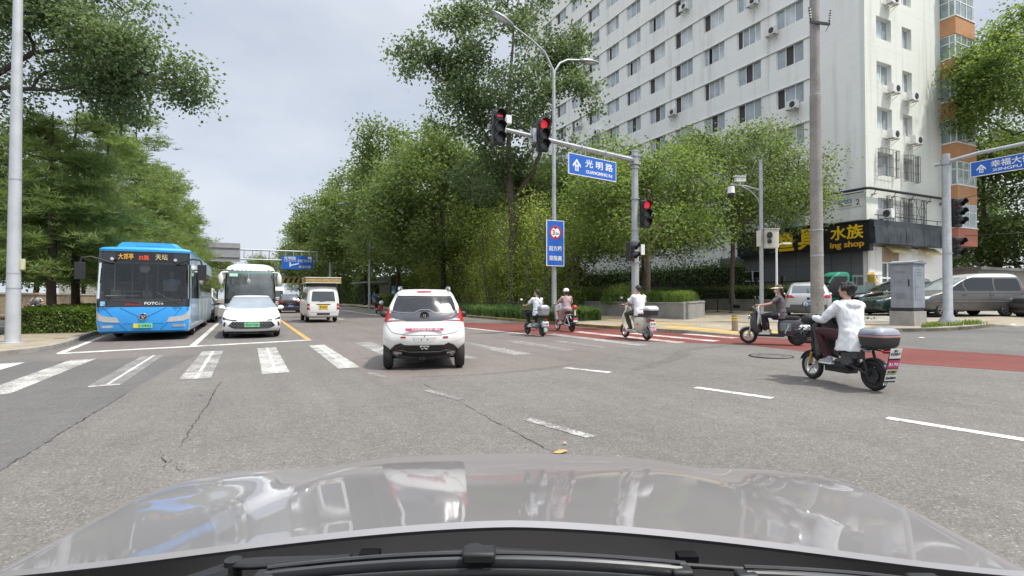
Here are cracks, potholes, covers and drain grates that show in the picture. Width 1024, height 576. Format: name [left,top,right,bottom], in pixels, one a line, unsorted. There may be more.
crack [161,385,219,473]
